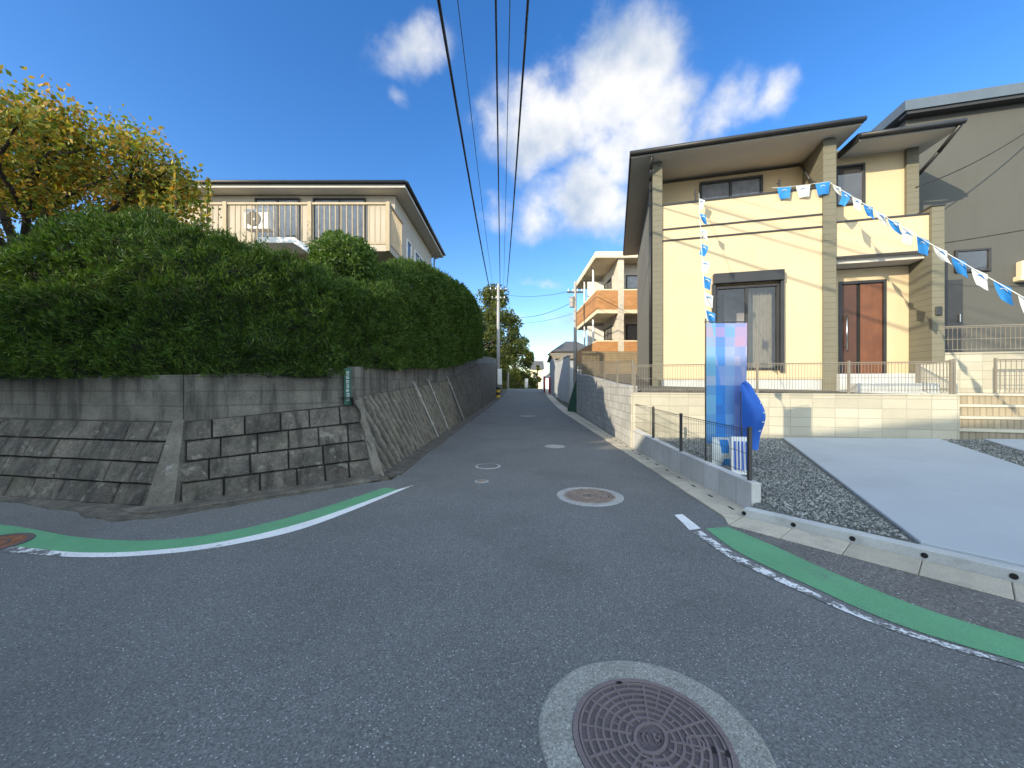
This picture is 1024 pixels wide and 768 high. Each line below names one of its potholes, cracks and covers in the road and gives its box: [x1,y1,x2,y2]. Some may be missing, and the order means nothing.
manhole cover [557,487,624,507]
manhole cover [0,533,36,550]
manhole cover [538,660,777,768]
